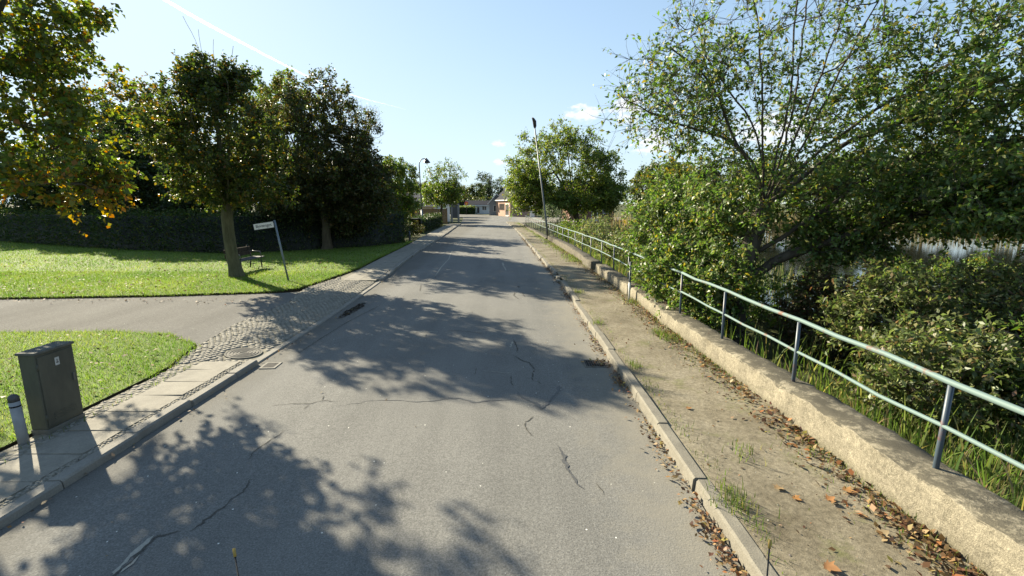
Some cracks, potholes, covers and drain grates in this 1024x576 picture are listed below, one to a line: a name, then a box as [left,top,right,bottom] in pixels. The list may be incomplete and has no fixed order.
manhole cover [224,347,263,359]
crack [112,480,250,576]
crack [475,339,541,385]
